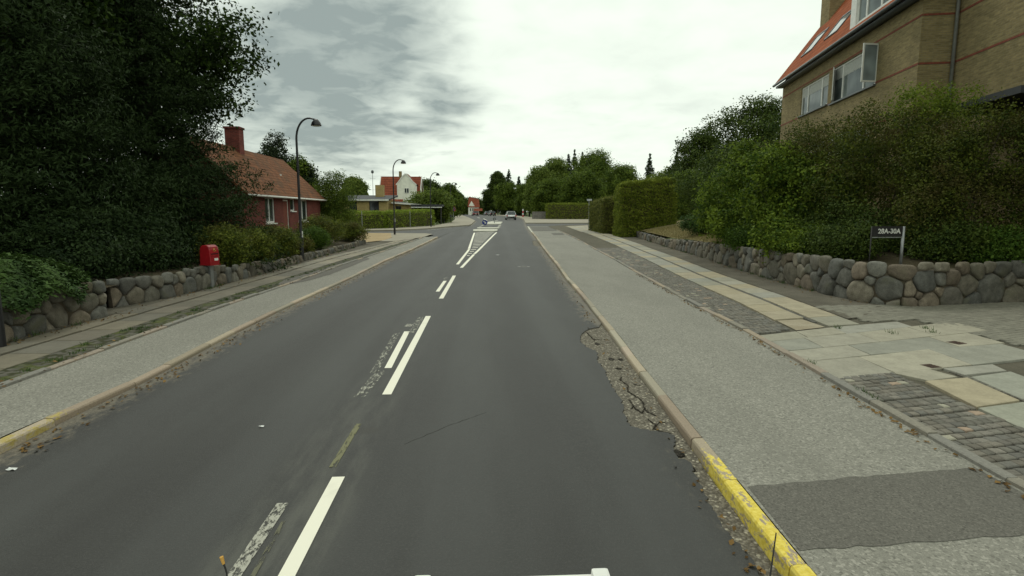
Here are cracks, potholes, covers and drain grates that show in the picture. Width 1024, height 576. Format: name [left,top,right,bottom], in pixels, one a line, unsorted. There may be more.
crack [620,376,670,434]
pothole [580,324,781,576]
